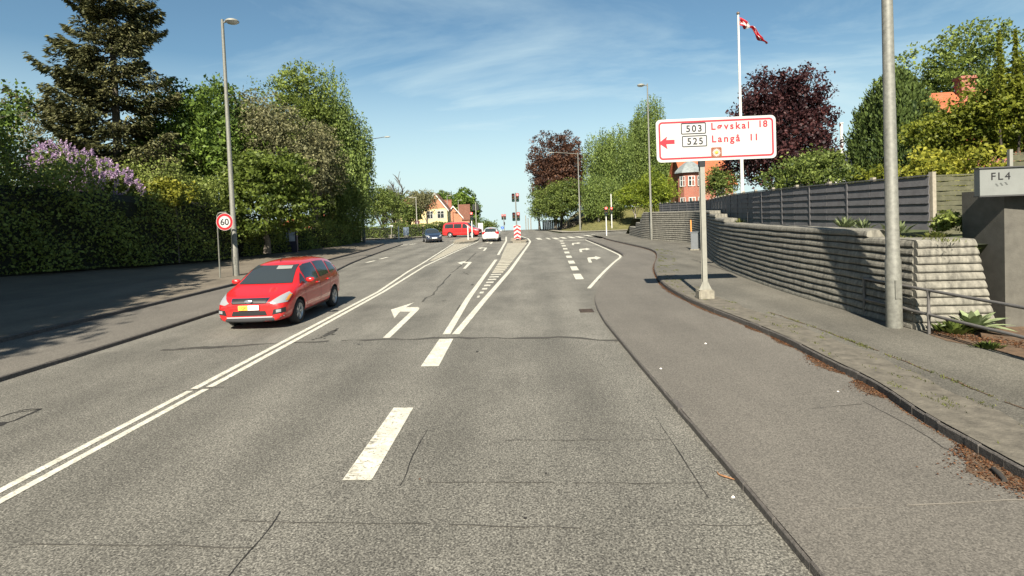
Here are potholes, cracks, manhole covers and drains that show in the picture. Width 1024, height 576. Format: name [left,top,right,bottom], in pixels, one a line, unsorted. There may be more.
crack [422,253,476,311]
crack [19,512,581,576]
